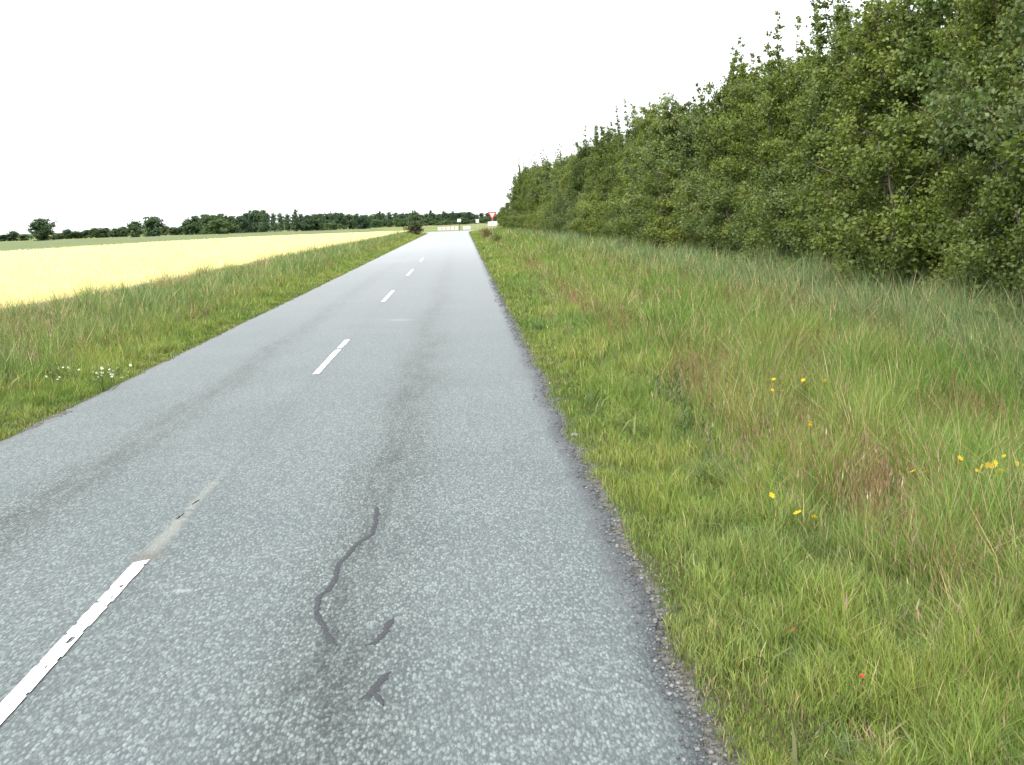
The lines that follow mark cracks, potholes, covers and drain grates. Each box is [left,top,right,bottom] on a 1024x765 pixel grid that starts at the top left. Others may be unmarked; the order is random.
crack [314,507,394,645]
crack [358,671,392,705]
